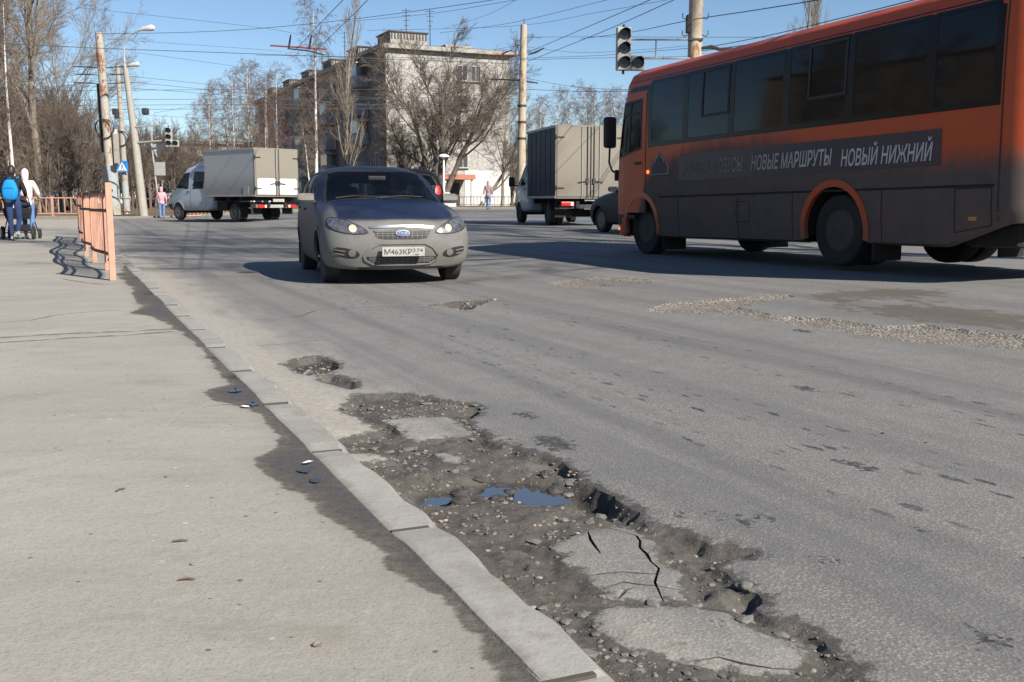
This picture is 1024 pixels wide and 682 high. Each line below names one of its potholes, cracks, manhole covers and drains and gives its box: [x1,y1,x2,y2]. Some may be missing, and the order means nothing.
pothole [318,375,357,390]
pothole [646,294,1024,350]
pothole [427,300,495,310]
crack [559,528,681,602]
pothole [338,394,859,682]
pothole [546,277,658,288]
pothole [285,357,339,375]
